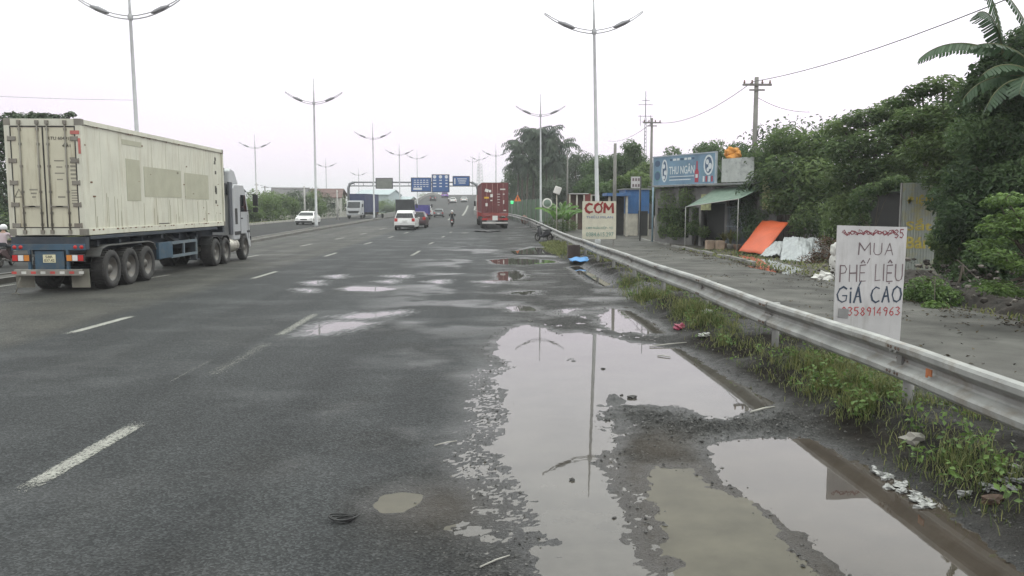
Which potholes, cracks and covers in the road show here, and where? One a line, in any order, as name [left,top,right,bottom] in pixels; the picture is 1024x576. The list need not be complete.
pothole [512,246,557,255]
pothole [696,431,1024,576]
pothole [443,322,797,576]
pothole [576,307,674,338]
pothole [630,462,836,576]
pothole [493,270,534,282]
pothole [500,304,555,312]
